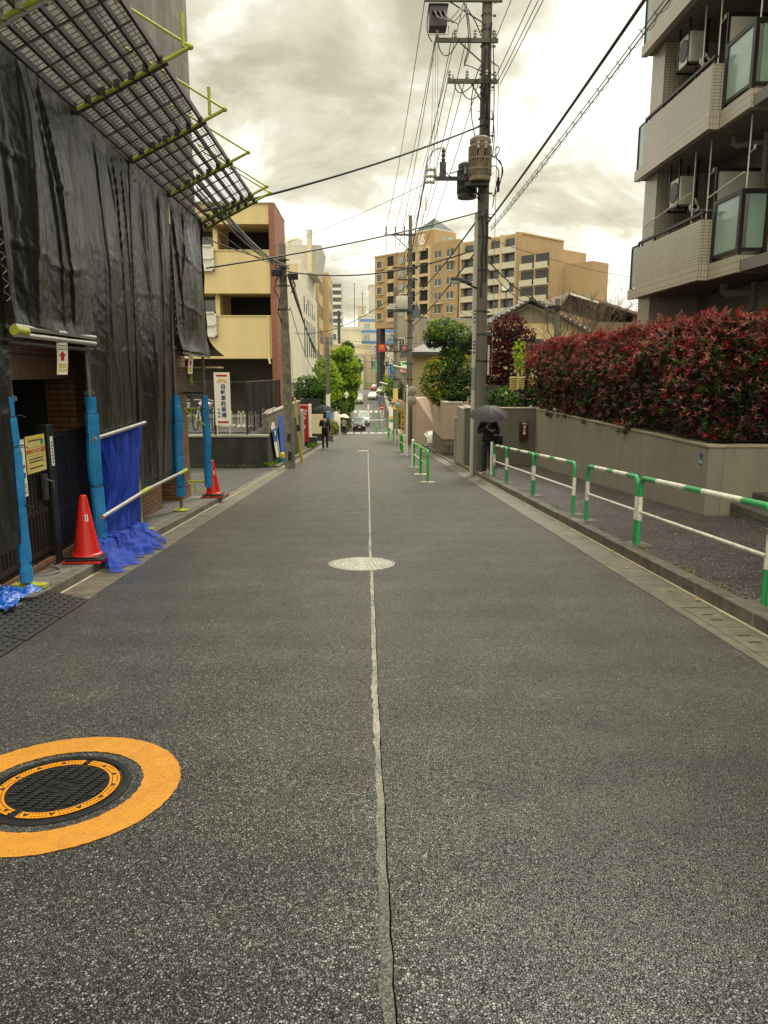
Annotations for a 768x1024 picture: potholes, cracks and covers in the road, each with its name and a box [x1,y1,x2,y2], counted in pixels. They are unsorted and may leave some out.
manhole cover [328,557,395,572]
manhole cover [0,737,181,857]
